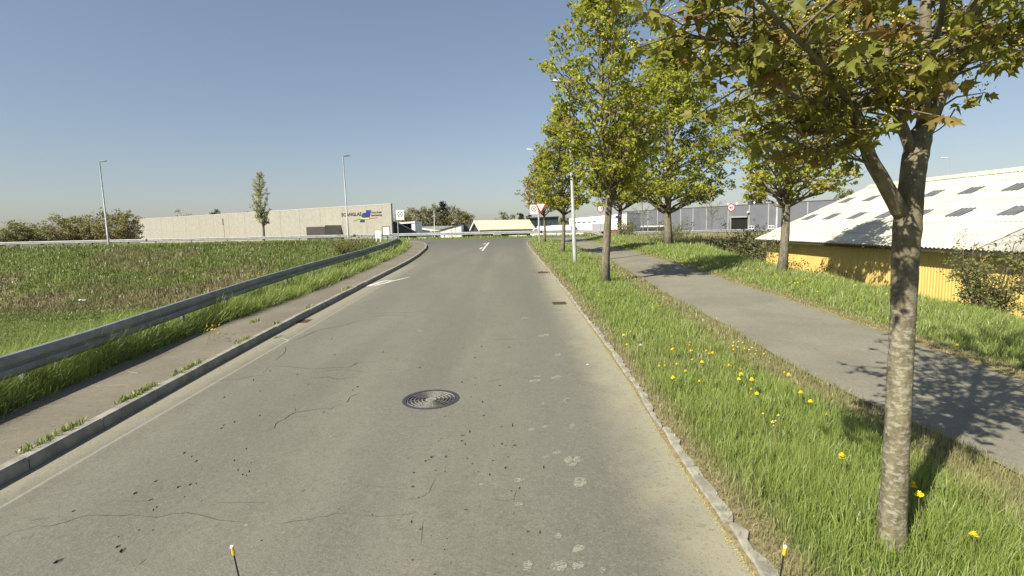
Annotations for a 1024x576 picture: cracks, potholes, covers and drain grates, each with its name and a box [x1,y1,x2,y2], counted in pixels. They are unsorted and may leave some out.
manhole cover [402,389,460,410]
crack [221,312,408,429]
crack [10,499,258,534]
